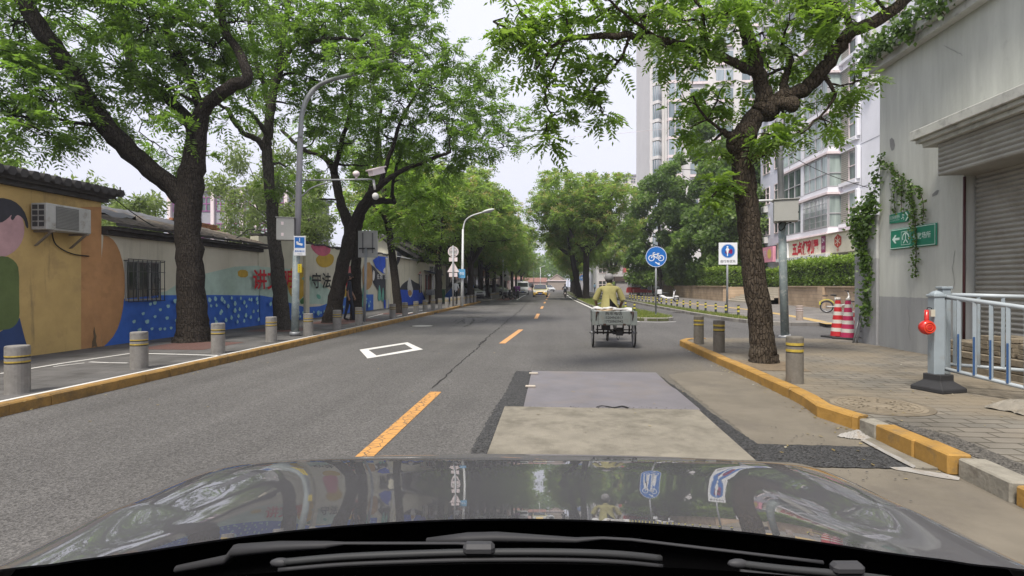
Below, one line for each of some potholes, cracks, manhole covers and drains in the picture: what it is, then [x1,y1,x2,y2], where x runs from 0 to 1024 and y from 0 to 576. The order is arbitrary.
crack [432,304,526,388]
manhole cover [823,395,937,416]
